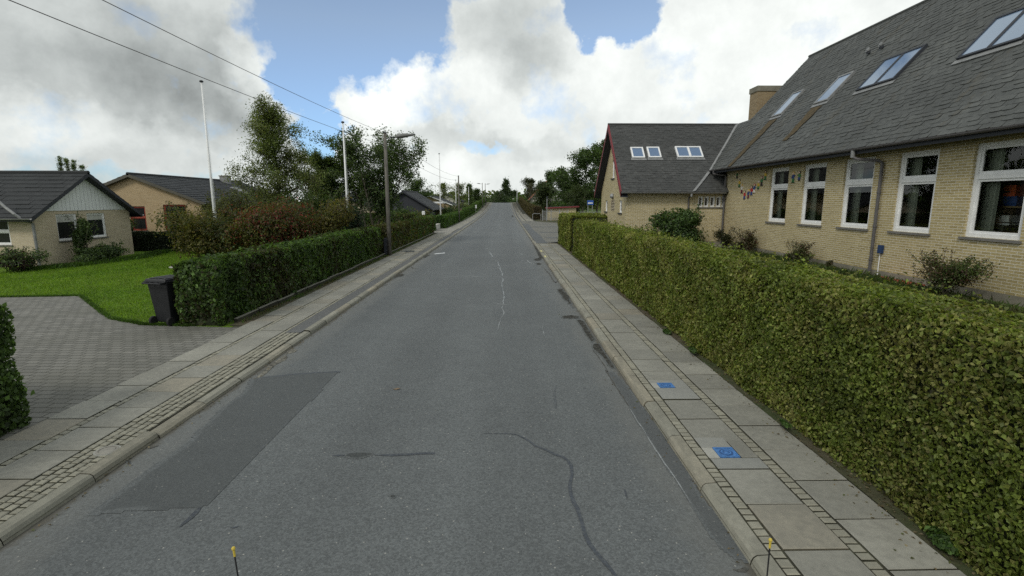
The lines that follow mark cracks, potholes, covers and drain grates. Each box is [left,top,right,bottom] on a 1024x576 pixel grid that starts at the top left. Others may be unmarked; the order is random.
manhole cover [712,447,740,458]
crack [445,246,505,328]
